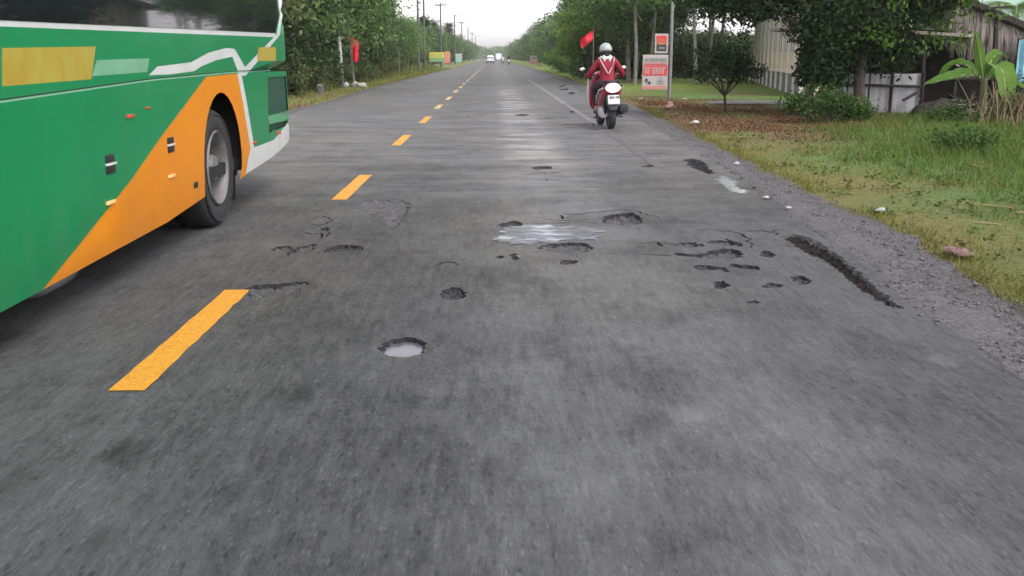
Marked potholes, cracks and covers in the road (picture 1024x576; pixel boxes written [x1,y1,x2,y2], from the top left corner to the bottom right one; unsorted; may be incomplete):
crack [717,229,784,248]
pothole [378,337,428,357]
pothole [602,212,643,225]
pothole [439,287,468,300]
pothole [245,281,309,297]
pothole [285,244,318,256]
pothole [780,234,906,310]
pothole [682,159,714,174]
pothole [674,249,745,259]
